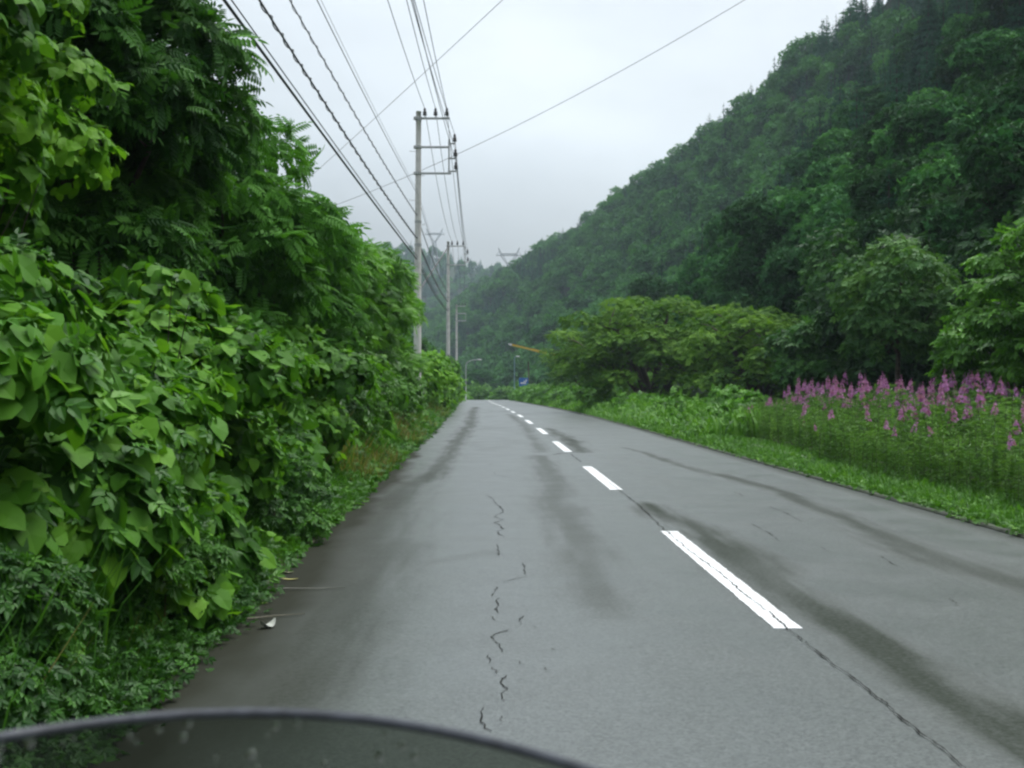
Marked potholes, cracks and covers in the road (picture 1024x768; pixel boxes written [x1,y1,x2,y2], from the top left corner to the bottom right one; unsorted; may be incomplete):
crack [480,564,533,731]
